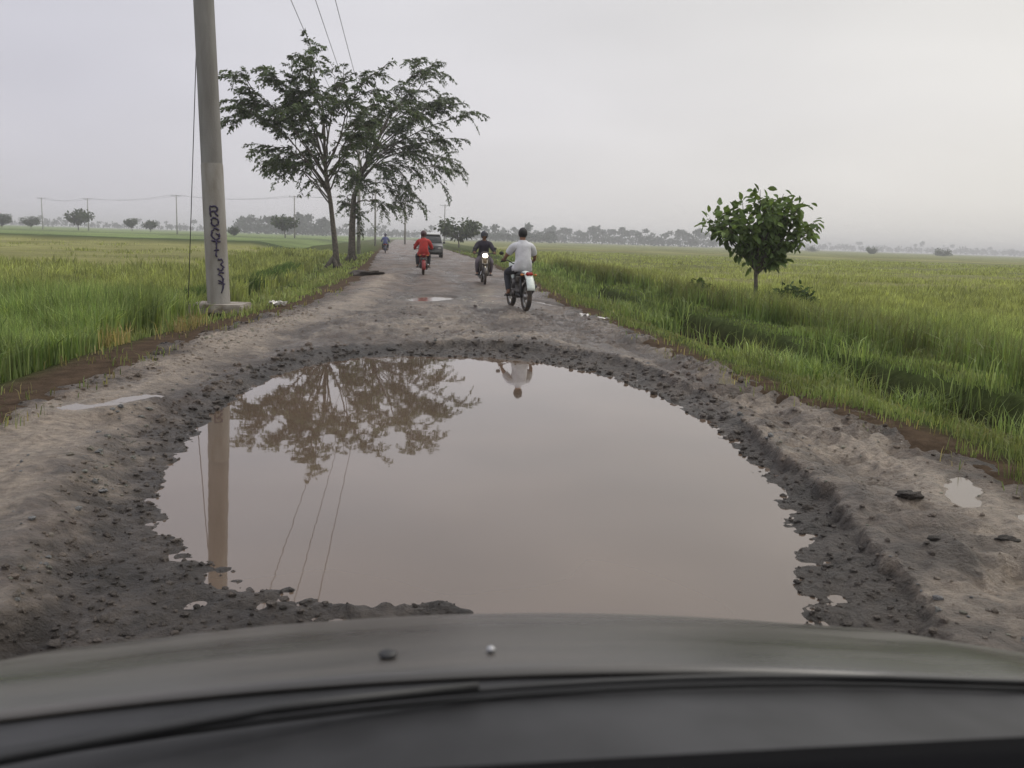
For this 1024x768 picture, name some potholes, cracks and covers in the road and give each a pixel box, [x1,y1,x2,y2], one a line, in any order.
pothole [0,339,960,660]
